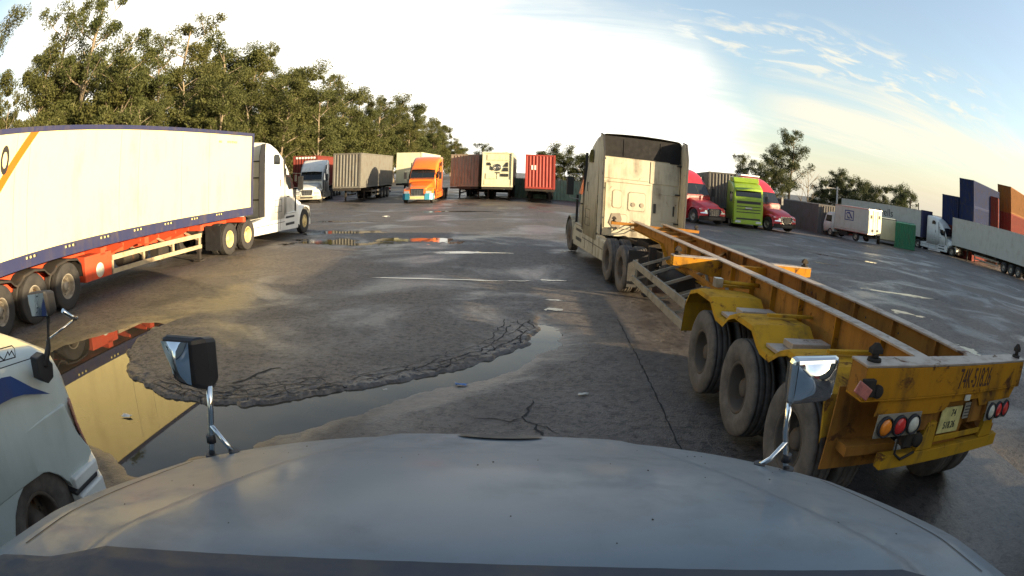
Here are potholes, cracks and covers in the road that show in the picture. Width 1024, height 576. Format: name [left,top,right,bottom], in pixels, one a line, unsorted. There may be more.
crack [617,319,682,449]
crack [479,401,558,435]
pothole [31,309,595,489]
crack [350,319,536,382]
